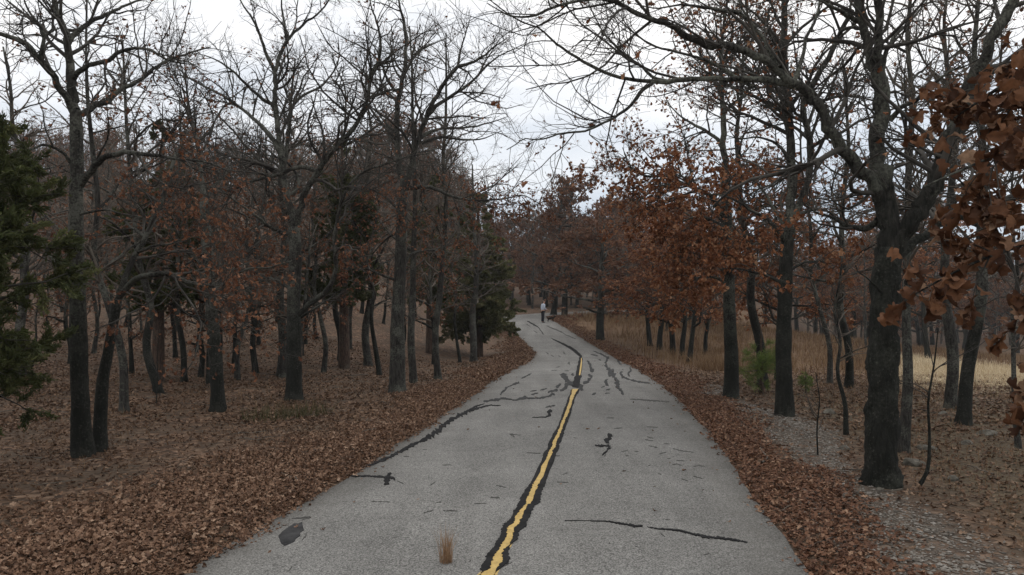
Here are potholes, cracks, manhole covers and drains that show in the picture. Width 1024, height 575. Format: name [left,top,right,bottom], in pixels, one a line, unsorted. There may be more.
crack [361,403,560,513]
crack [527,324,576,371]
crack [565,519,748,555]
crack [604,426,705,481]
